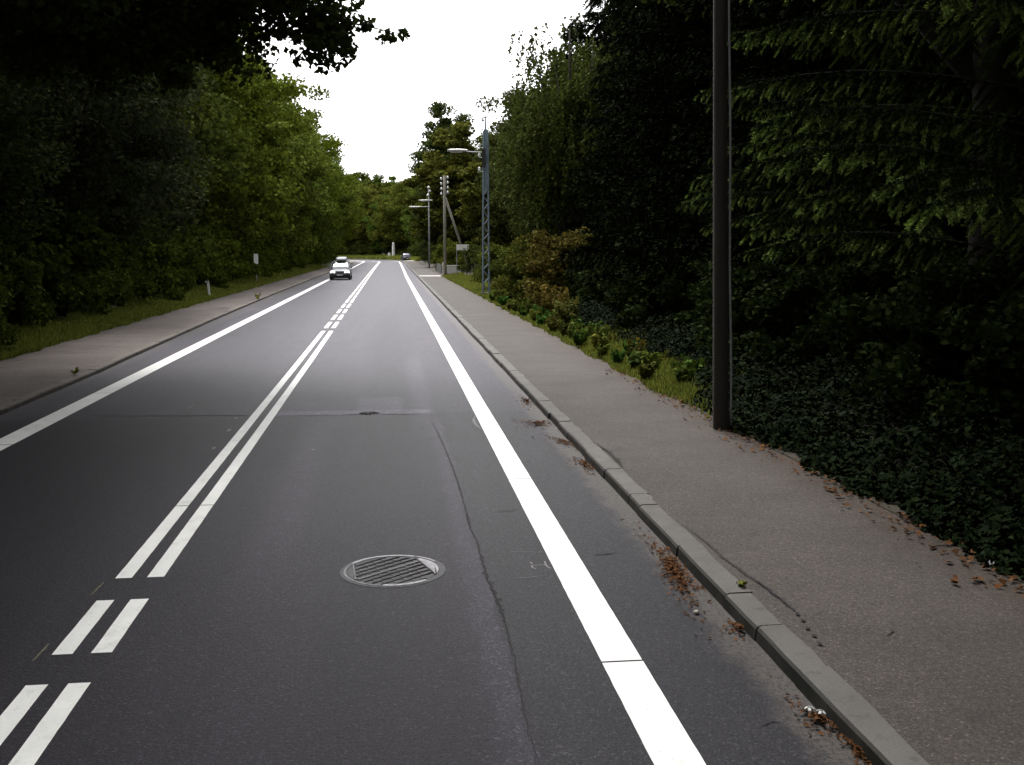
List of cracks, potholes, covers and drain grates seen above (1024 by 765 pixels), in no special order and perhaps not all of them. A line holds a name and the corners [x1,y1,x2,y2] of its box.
crack [430,412,537,765]
